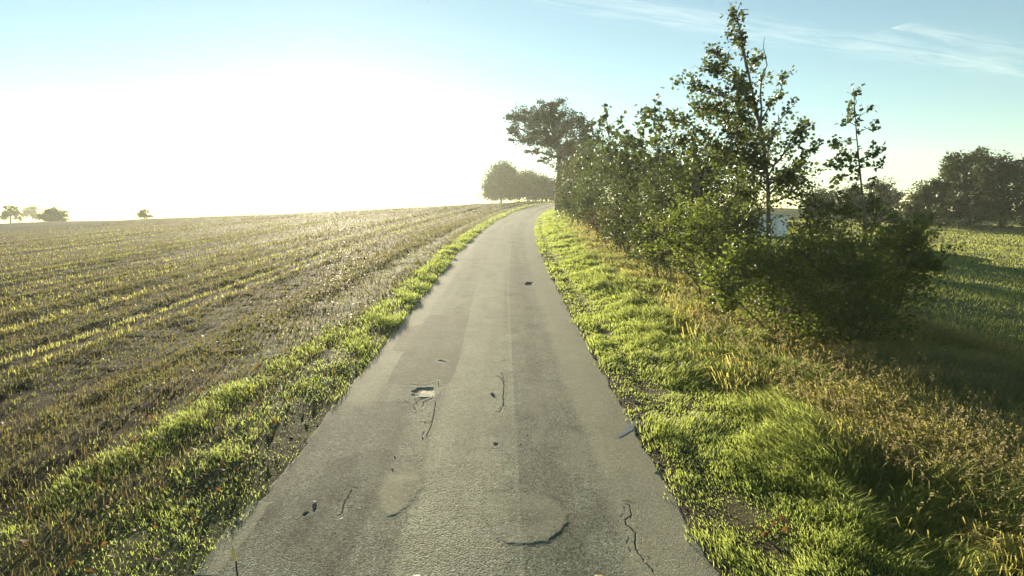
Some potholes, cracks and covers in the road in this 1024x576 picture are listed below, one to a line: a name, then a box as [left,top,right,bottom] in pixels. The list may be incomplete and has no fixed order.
crack [331,487,357,519]
crack [619,501,664,576]
crack [492,358,509,414]
crack [398,380,443,439]
pothole [406,386,442,413]
